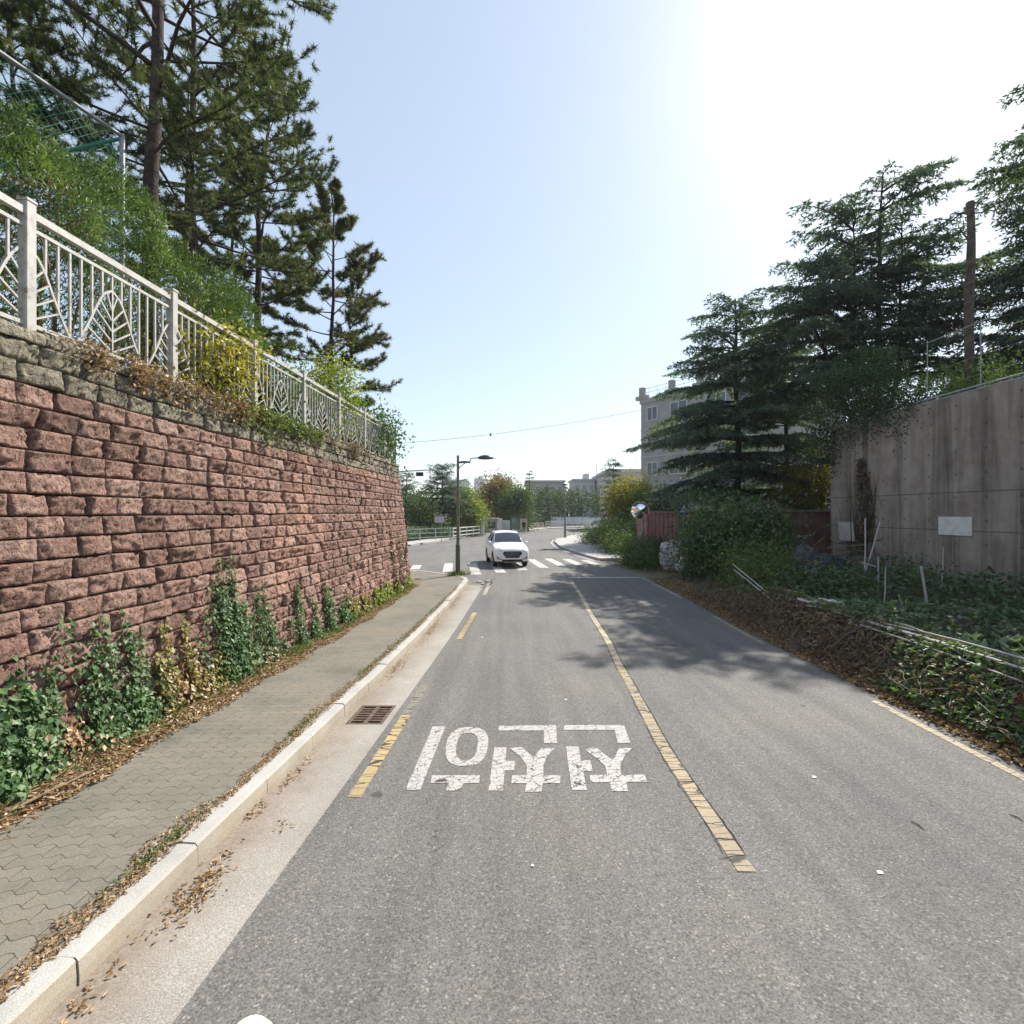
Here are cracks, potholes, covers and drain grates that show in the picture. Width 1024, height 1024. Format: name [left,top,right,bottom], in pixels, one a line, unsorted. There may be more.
drain grate [346,705,396,724]
